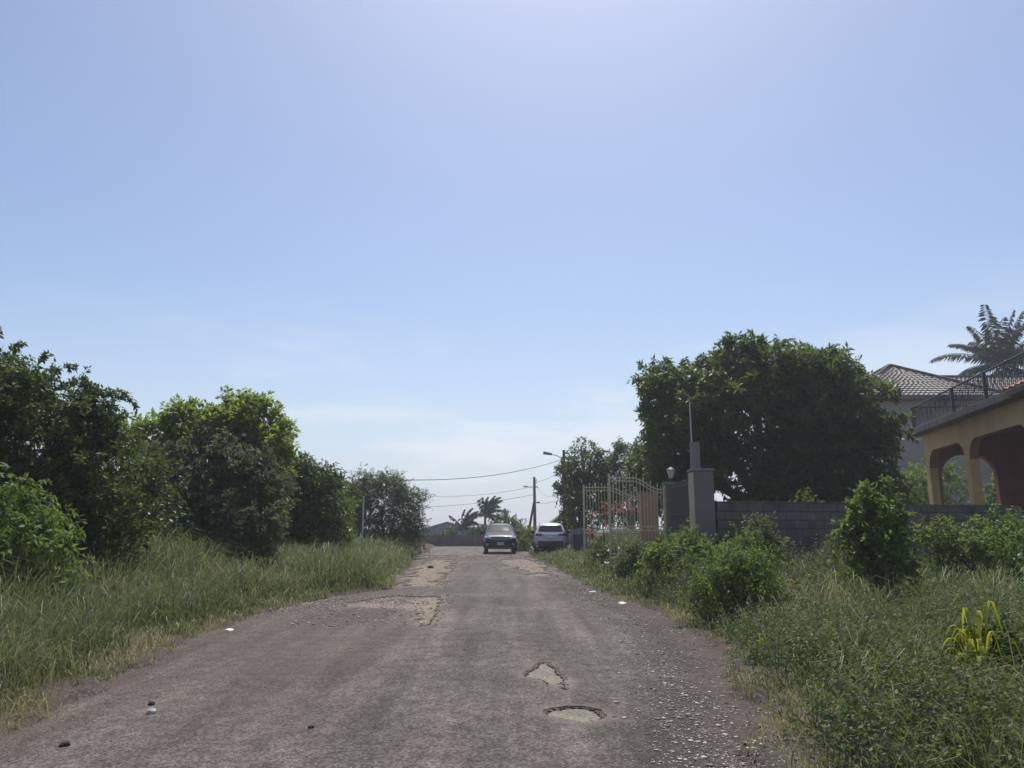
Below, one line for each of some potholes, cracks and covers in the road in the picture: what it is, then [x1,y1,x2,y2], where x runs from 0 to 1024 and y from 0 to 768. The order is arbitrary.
pothole [542,706,607,723]
pothole [398,559,459,587]
pothole [494,559,553,572]
pothole [522,662,570,690]
pothole [343,596,445,626]
